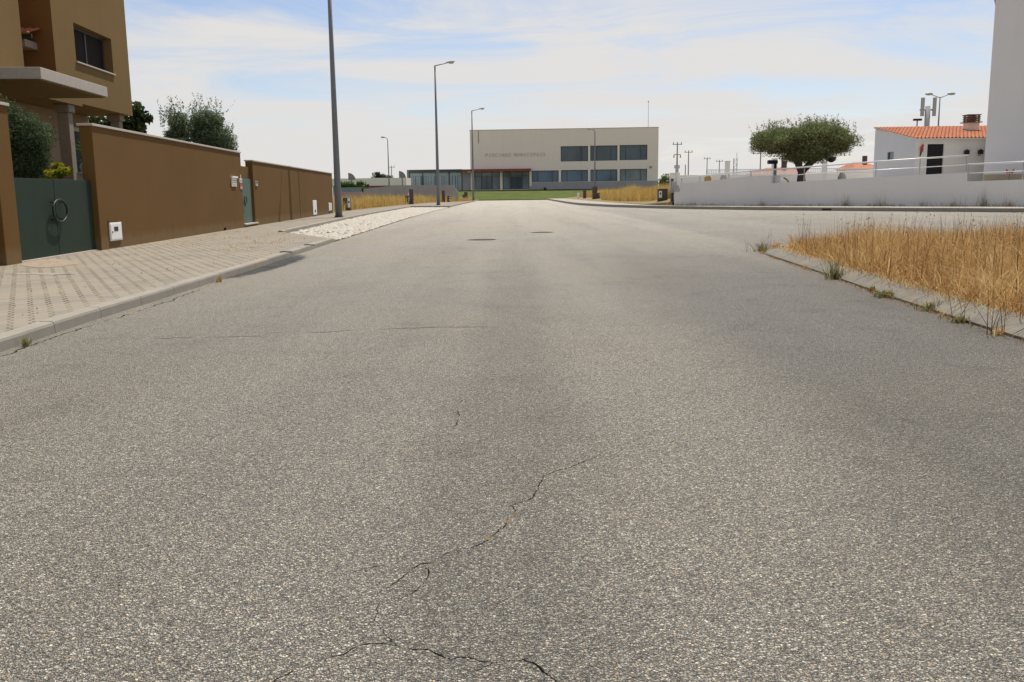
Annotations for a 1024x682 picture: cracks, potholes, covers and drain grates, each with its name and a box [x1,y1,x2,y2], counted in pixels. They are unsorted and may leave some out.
crack [272,455,598,682]
